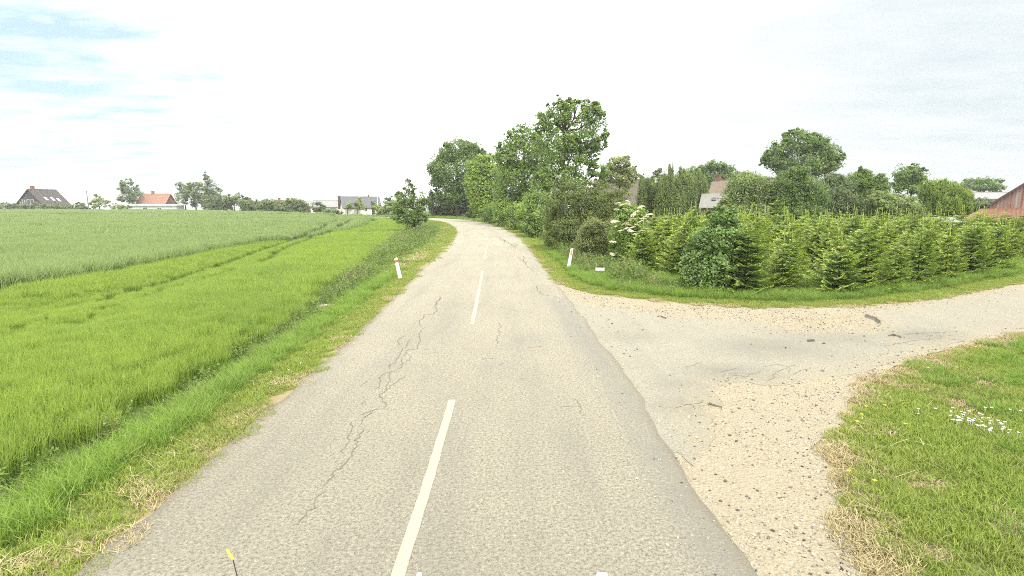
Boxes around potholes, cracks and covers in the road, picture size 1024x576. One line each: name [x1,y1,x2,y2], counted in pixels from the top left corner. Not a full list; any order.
crack [298,295,441,523]
